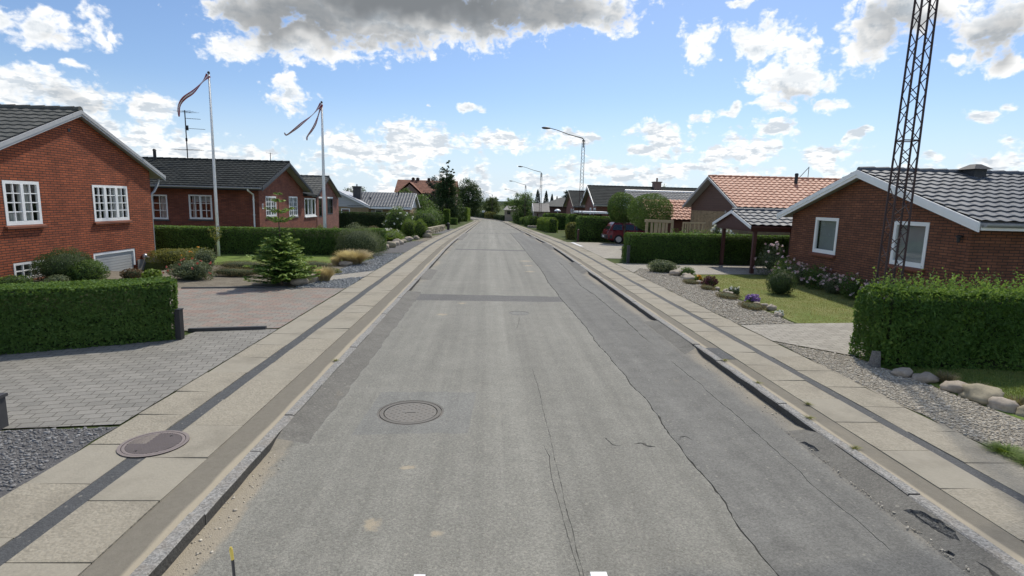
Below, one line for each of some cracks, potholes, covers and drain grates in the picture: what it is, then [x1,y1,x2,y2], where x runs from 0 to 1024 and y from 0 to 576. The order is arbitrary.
crack [510,233,779,576]
manhole cover [377,400,444,425]
pothole [904,509,960,541]
manhole cover [116,430,190,460]
crack [674,363,893,552]
